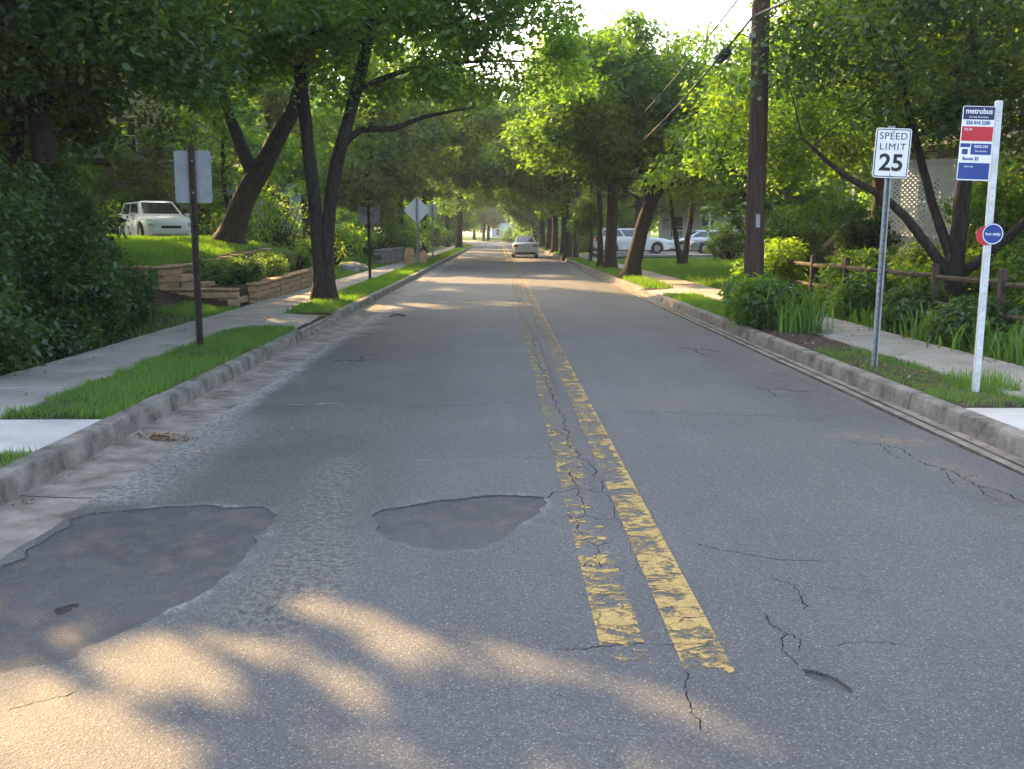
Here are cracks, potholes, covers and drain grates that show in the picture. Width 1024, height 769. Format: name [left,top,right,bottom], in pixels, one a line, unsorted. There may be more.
crack [684,672,702,732]
crack [699,544,877,610]
crack [759,609,801,668]
pothole [801,669,853,694]
crack [853,442,1023,503]
